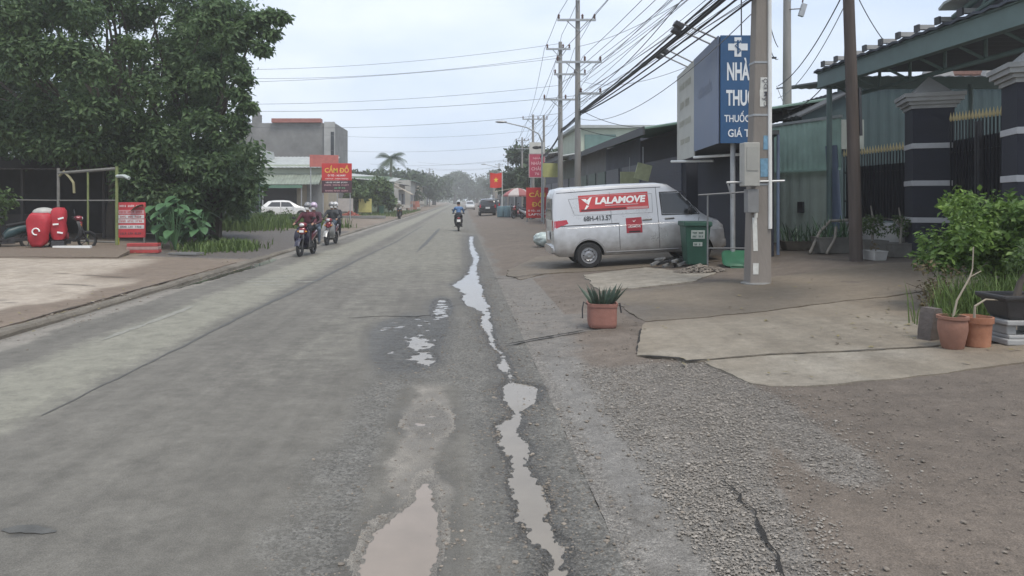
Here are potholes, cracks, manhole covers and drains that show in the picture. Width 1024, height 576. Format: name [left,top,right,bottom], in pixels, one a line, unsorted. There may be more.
pothole [344,468,451,576]
pothole [499,462,559,528]
pothole [490,411,540,463]
pothole [399,335,439,351]
pothole [490,381,549,413]
pothole [489,347,520,382]
pothole [449,262,492,310]
pothole [407,349,442,368]
pothole [512,525,582,576]
crack [724,479,785,576]
pothole [476,310,504,348]
pothole [427,298,455,321]
